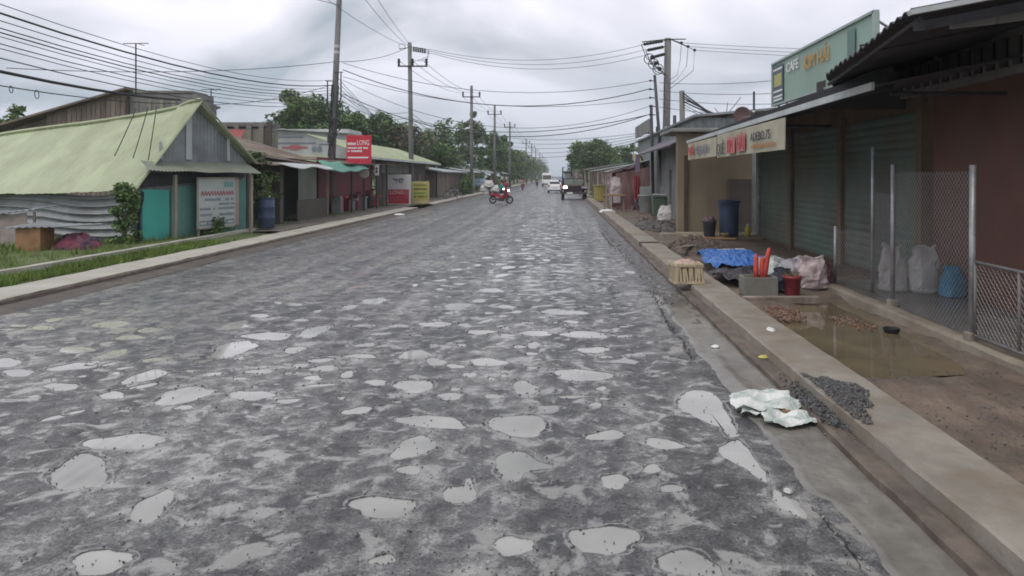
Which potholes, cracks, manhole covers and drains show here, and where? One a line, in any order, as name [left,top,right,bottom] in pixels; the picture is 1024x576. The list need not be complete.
crack [811,506,870,570]
pothole [488,533,539,557]
pothole [490,448,555,484]
pothole [671,389,742,440]
pothole [717,437,773,484]
pothole [207,340,263,360]
pothole [390,413,472,430]
pothole [123,487,179,525]
pothole [482,412,553,439]
pothole [341,494,425,523]
pothole [34,449,117,492]
pothole [561,522,645,557]
